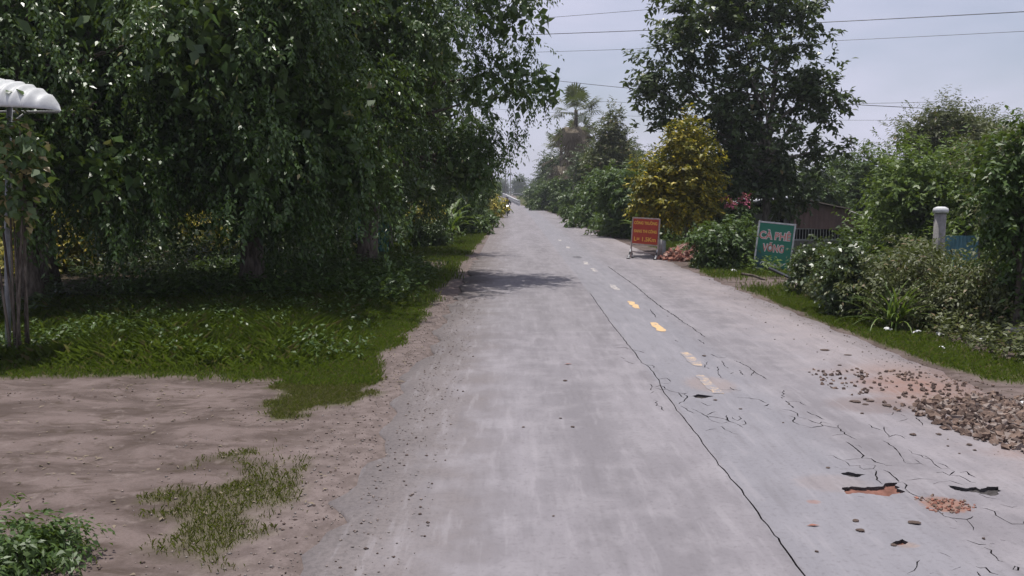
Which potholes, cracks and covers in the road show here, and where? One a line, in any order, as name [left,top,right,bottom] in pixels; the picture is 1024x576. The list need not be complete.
crack [591,295,1024,576]
pothole [842,483,905,496]
pothole [948,485,1000,496]
